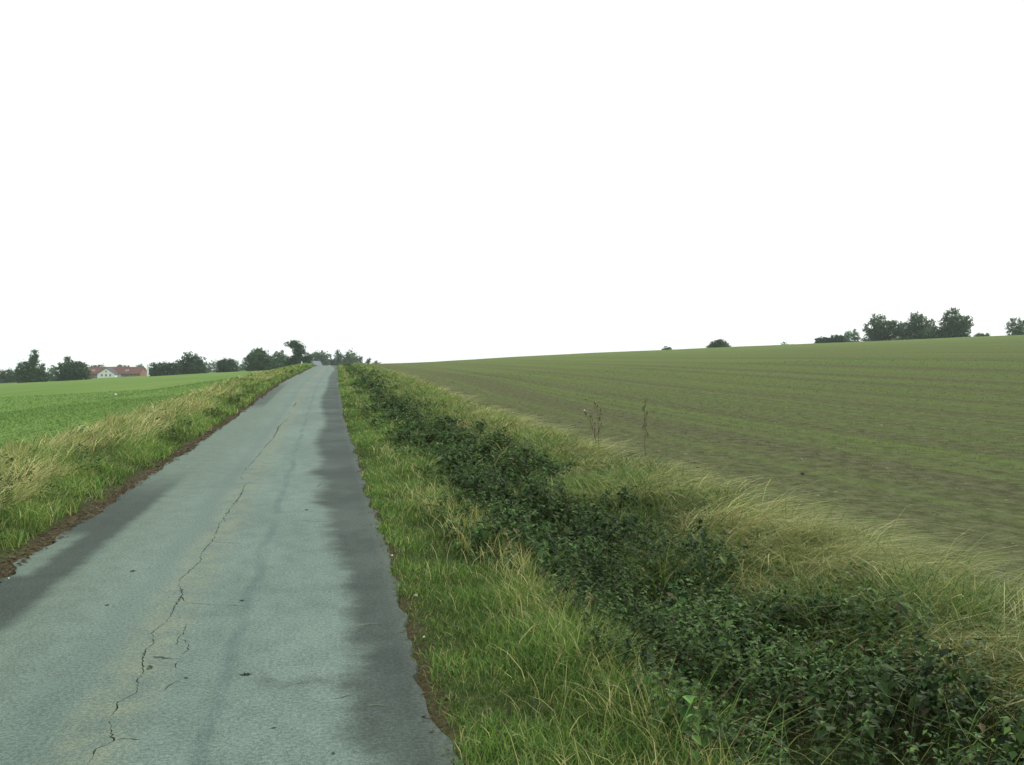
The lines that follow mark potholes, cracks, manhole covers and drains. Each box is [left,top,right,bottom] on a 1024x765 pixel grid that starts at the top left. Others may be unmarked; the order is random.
crack [87,418,288,765]
